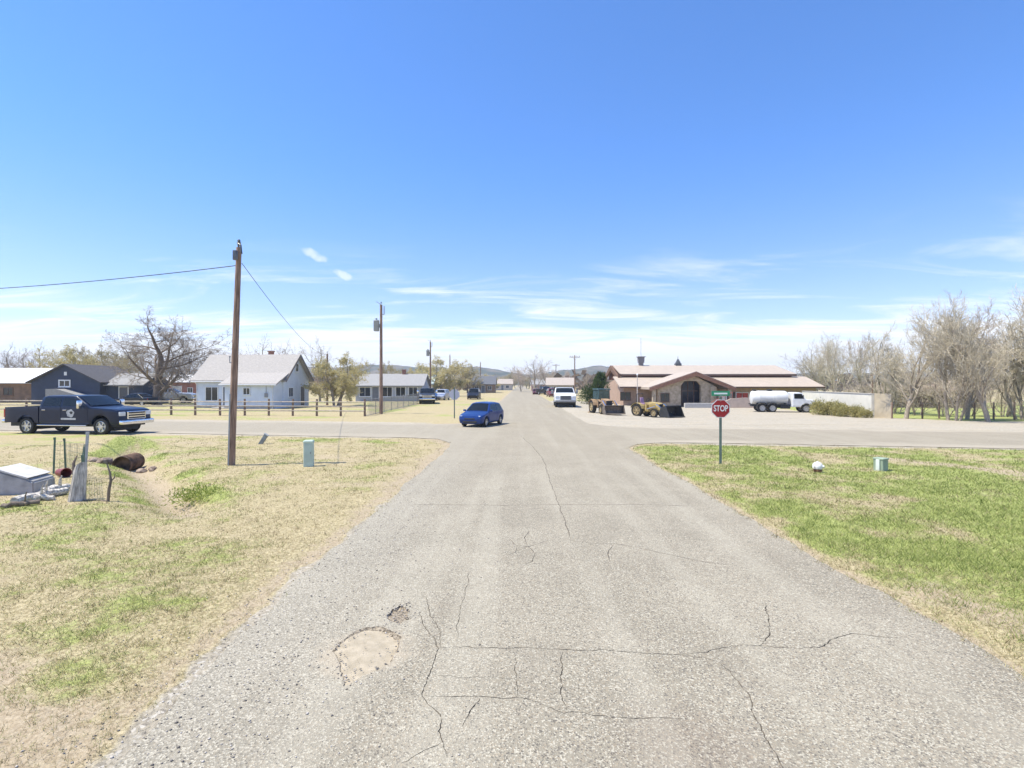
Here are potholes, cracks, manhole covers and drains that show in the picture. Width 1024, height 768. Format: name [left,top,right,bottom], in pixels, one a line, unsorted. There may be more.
crack [429,436,728,565]
crack [406,578,893,768]
pothole [387,606,409,624]
